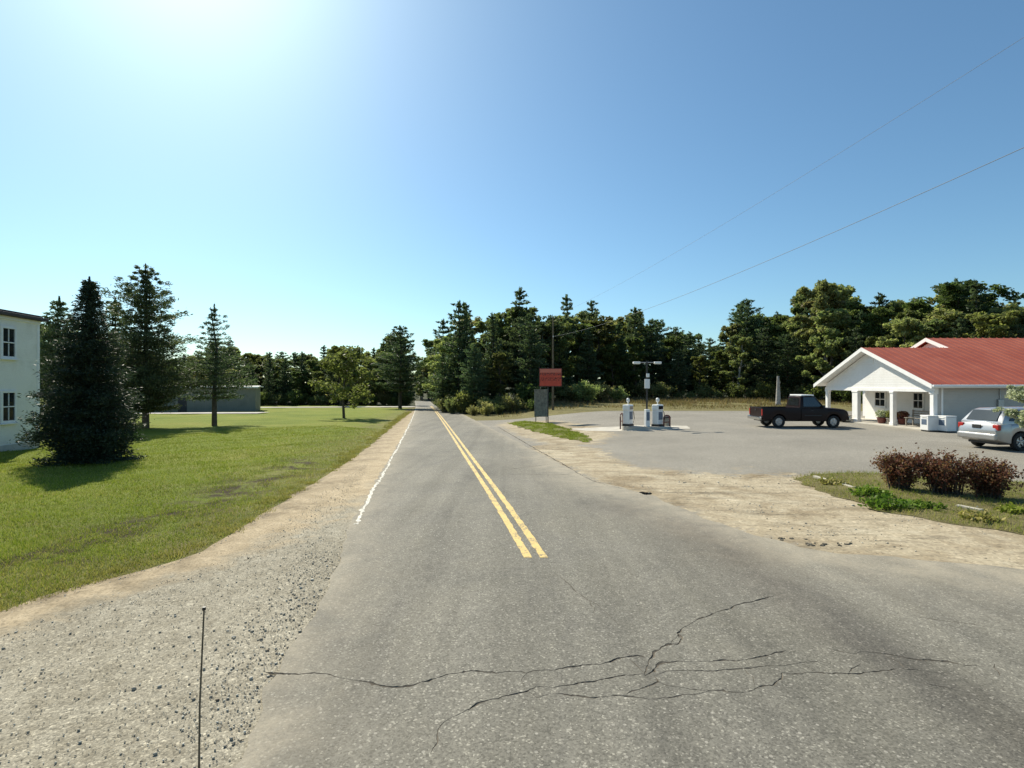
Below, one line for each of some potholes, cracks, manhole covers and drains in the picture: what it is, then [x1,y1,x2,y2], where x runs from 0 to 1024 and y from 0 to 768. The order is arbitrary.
crack [266,596,1000,754]
crack [562,578,615,621]
